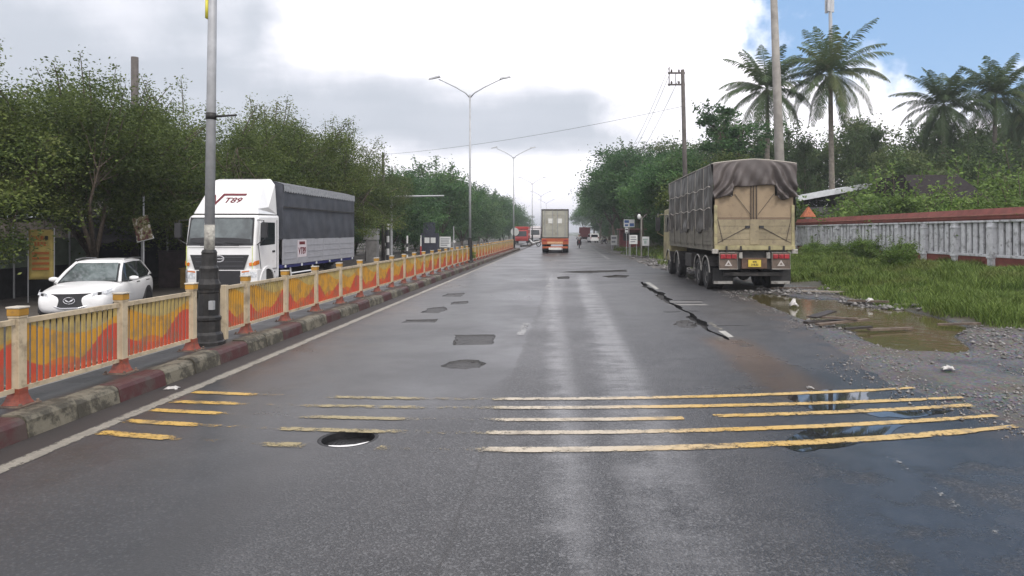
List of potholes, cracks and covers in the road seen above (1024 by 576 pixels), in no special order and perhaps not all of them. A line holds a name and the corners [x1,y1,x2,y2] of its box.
crack [641,282,736,340]
pothole [673,320,698,328]
pothole [441,360,486,369]
manhole cover [317,430,379,448]
